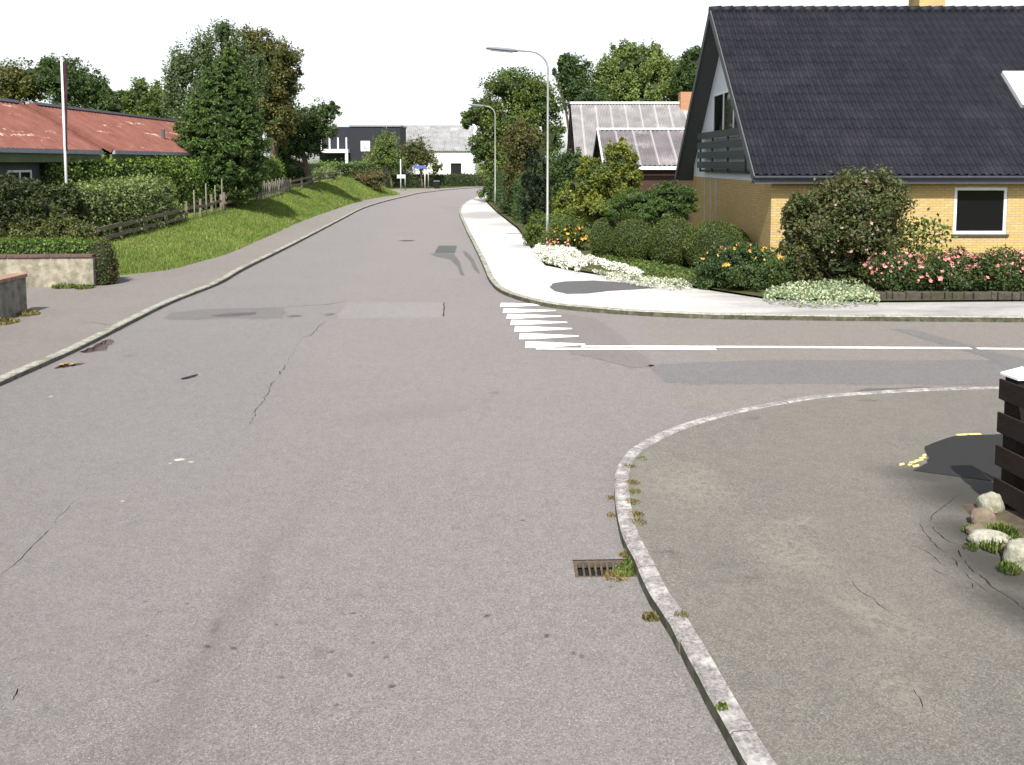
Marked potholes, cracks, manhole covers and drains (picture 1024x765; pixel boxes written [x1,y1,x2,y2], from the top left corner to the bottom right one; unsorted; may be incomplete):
crack [918,493,1024,609]
drain grate [573,559,637,577]
crack [254,302,339,417]
pothole [80,339,114,353]
